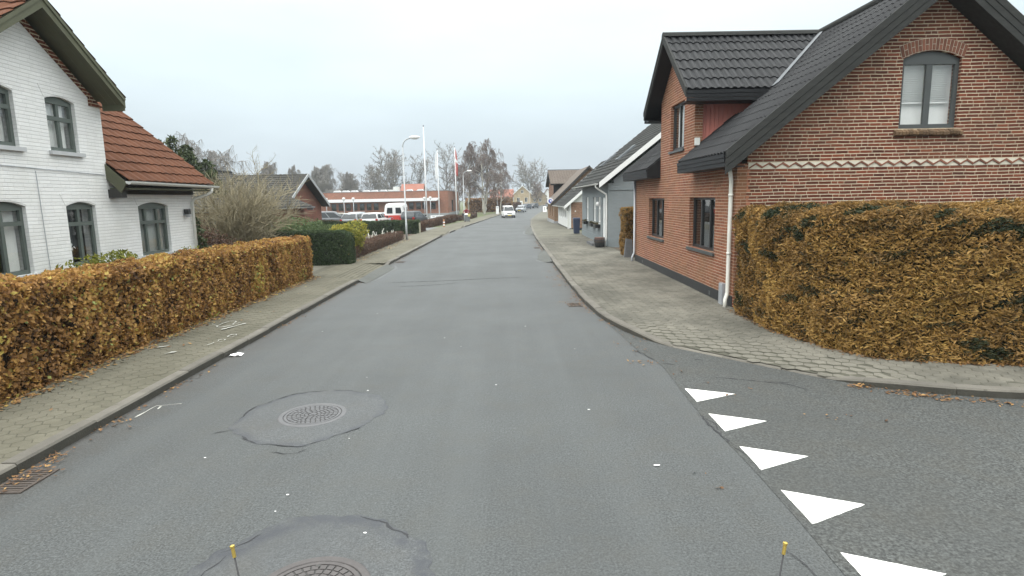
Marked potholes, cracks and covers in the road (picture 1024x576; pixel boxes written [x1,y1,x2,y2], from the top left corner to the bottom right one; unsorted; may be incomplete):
crack [201,516,408,576]
manhole cover [268,556,371,576]
manhole cover [278,403,347,427]
drain grate [0,469,60,494]
